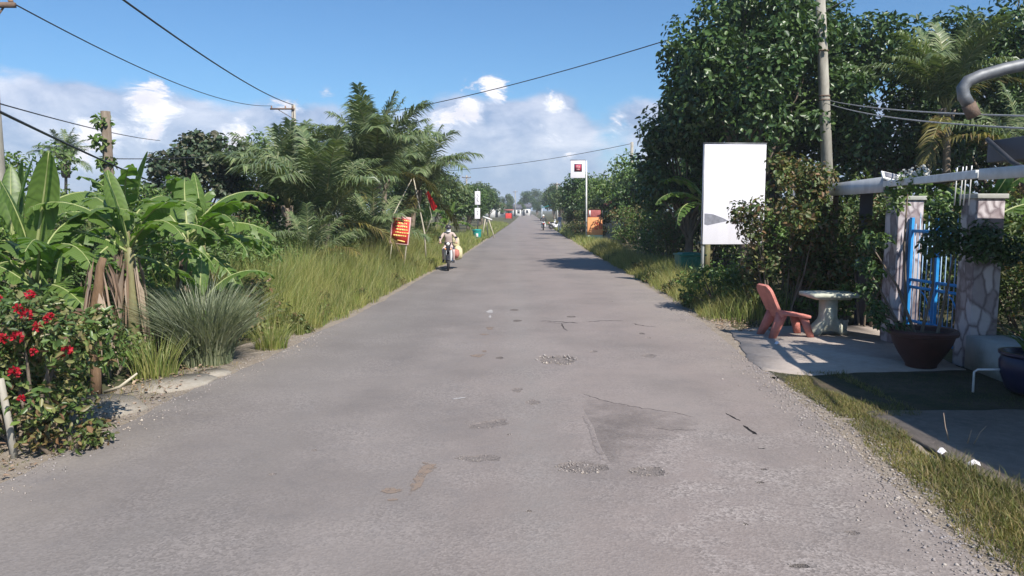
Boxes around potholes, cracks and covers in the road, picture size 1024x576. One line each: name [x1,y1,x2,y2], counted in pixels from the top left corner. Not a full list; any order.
pothole [627,466,669,477]
crack [543,320,653,331]
crack [726,413,765,449]
pothole [555,460,609,474]
pothole [466,419,513,429]
pothole [535,354,578,365]
